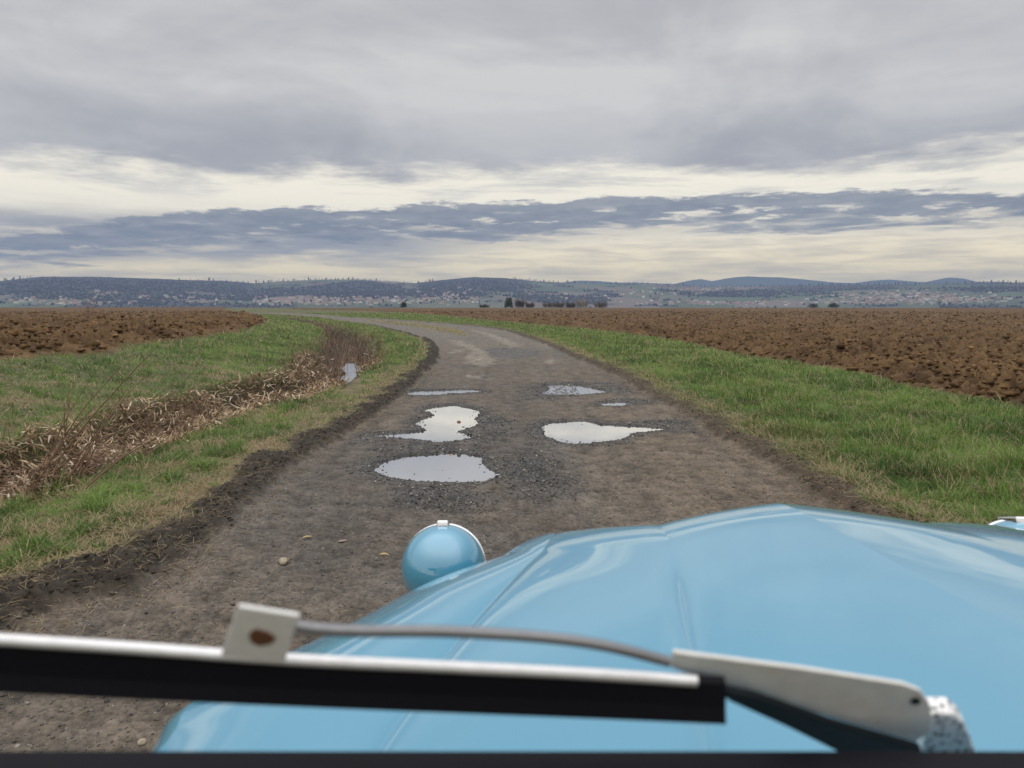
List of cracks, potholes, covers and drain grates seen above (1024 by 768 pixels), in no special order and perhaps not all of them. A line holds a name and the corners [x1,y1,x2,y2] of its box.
pothole [365,403,487,443]
pothole [403,388,483,396]
pothole [535,383,615,395]
pothole [533,419,674,445]
pothole [362,450,511,484]
